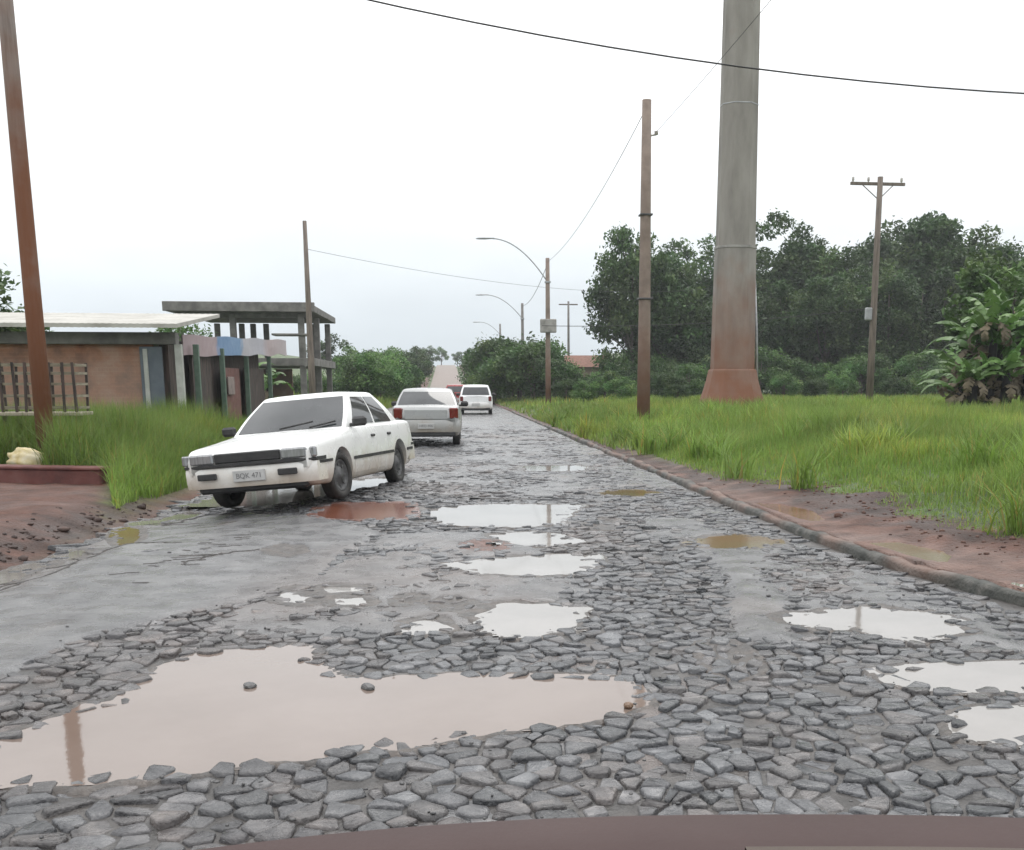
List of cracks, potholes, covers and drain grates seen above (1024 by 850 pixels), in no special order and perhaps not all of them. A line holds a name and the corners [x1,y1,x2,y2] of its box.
pothole [936,703,1024,752]
pothole [411,503,590,530]
pothole [765,604,984,646]
pothole [435,552,609,578]
pothole [484,530,588,548]
pothole [679,533,791,549]
pothole [862,659,1024,698]
pothole [0,643,659,797]
pothole [307,501,422,522]
pothole [452,600,594,642]
pothole [594,489,664,497]
